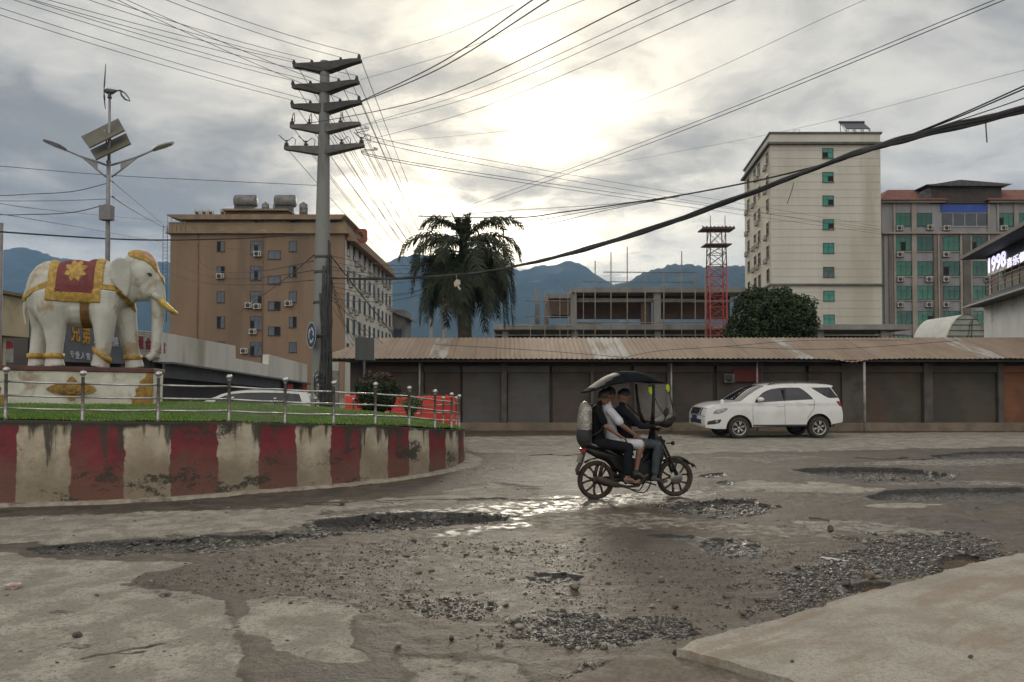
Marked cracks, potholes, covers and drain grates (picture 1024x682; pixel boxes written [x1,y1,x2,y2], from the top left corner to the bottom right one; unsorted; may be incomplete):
pothole [836,579,901,596]
pothole [305,511,516,535]
pothole [790,466,959,482]
pothole [690,537,772,556]
pothole [925,552,993,570]
pothole [7,531,321,558]
pothole [517,570,596,588]
pothole [665,498,778,519]
pothole [859,487,1024,502]
